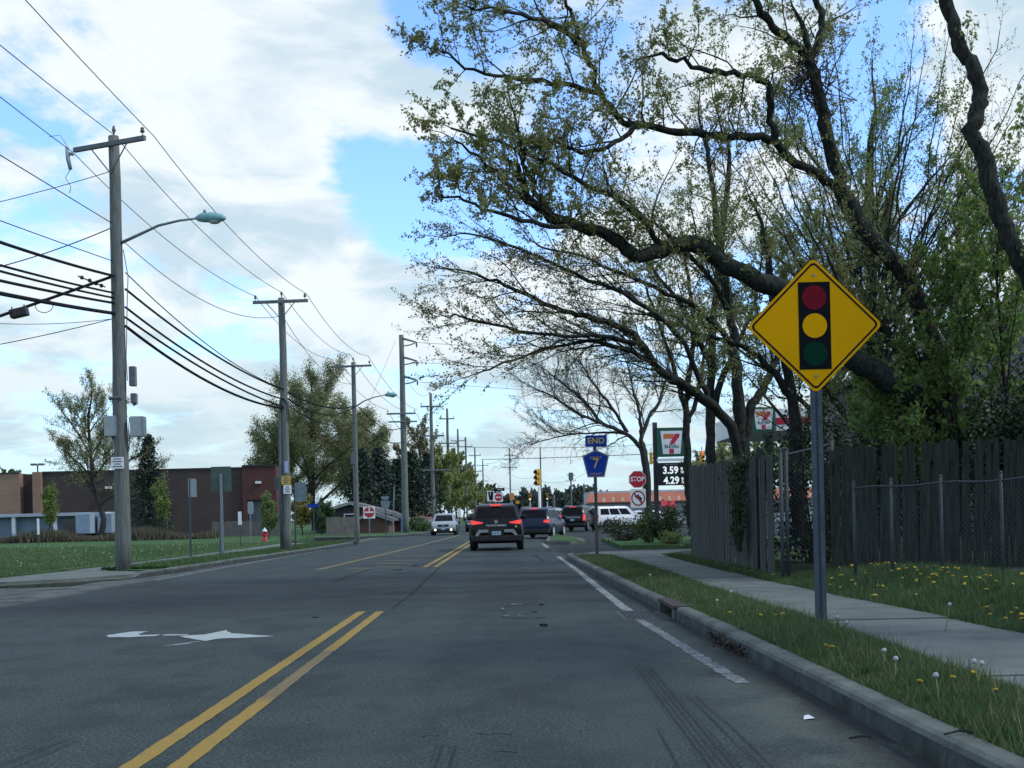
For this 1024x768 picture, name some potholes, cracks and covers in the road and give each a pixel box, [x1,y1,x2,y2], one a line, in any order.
drain grate [616,597,704,620]
